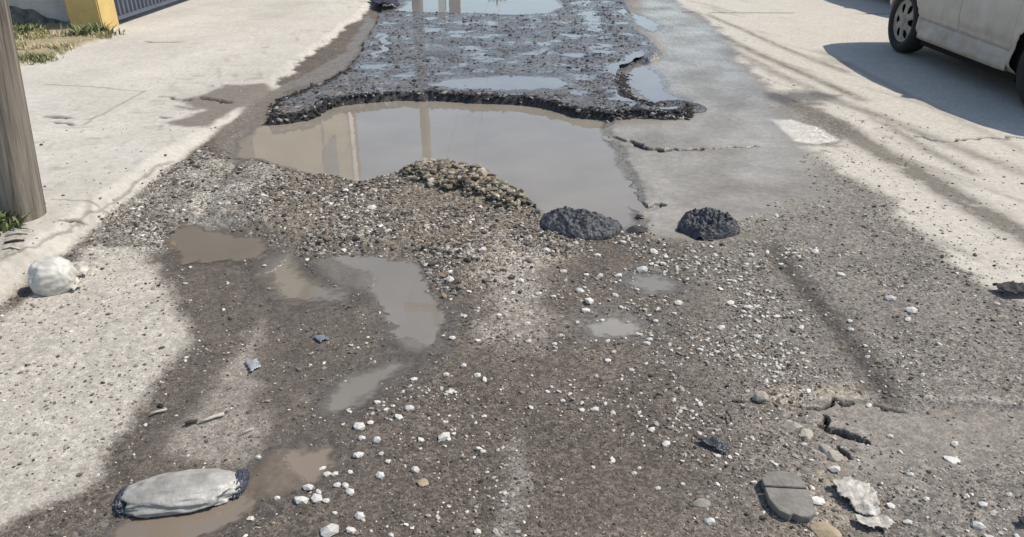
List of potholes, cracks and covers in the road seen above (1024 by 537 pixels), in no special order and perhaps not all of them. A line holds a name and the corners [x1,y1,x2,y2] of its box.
crack [606,136,760,153]
pothole [244,247,361,311]
pothole [617,269,690,297]
crack [912,135,1024,143]
crack [817,403,907,460]
pothole [310,249,456,358]
pothole [157,220,282,269]
pothole [576,309,656,343]
pothole [227,91,660,231]
